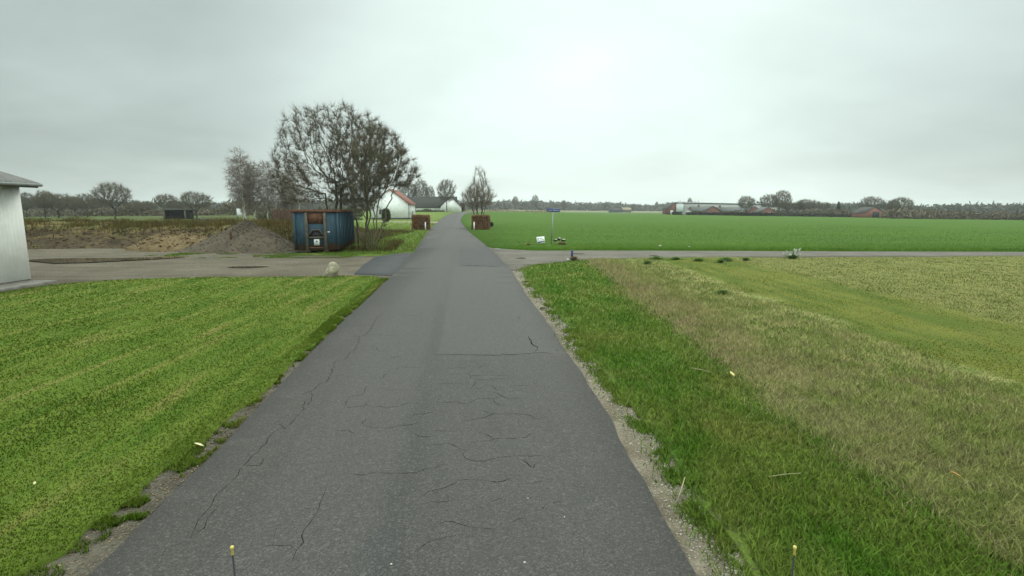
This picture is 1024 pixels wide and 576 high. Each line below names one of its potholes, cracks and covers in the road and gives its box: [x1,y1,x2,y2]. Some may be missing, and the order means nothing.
crack [156,317,378,567]
crack [342,347,569,509]
